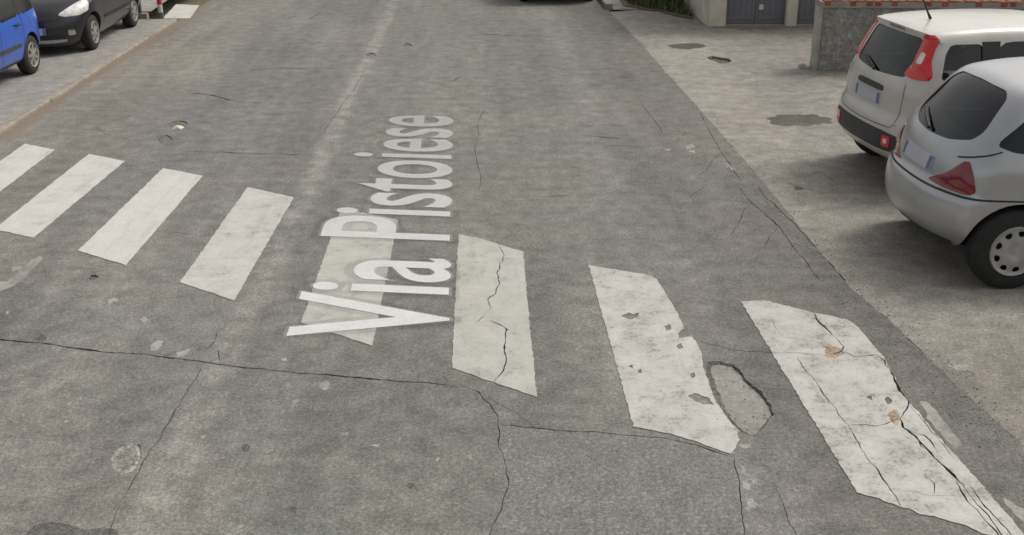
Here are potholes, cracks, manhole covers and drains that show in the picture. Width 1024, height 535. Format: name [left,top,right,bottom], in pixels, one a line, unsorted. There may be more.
pothole [706,361,774,437]
crack [700,114,915,345]
pothole [707,56,731,64]
crack [465,242,734,535]
crack [0,328,456,387]
